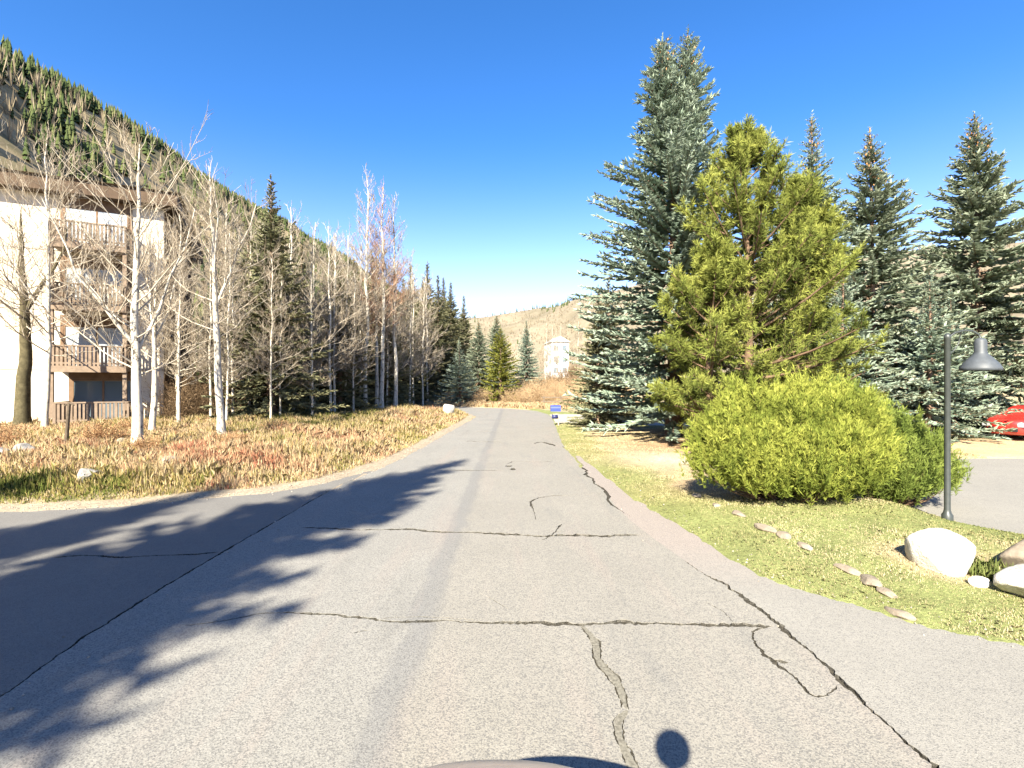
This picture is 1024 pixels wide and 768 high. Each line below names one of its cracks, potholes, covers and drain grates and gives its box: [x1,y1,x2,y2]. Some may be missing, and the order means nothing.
crack [307,495,636,539]
crack [193,562,939,768]
crack [459,442,623,512]
